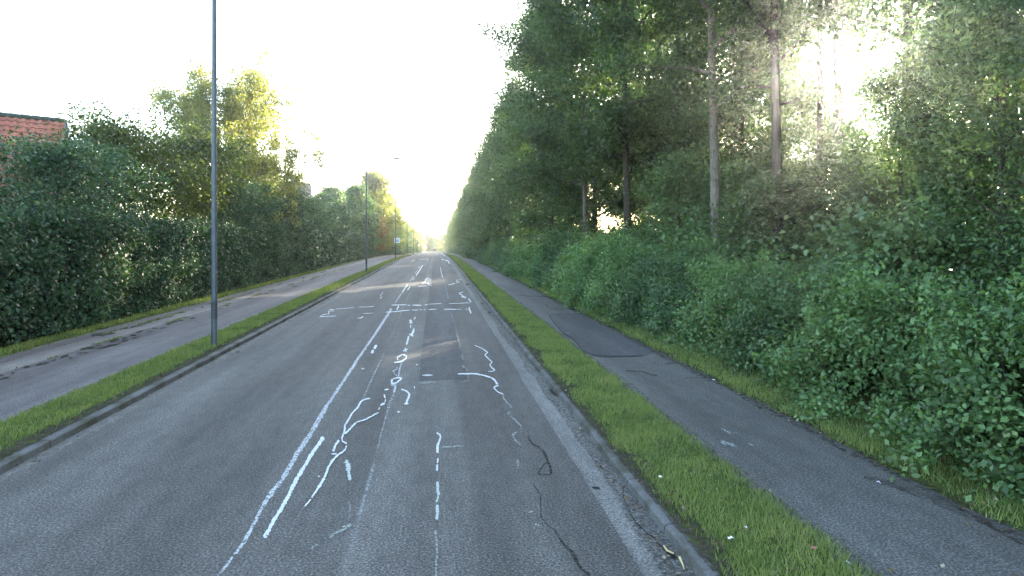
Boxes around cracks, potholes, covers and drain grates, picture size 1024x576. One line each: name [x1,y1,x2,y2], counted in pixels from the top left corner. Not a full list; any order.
crack [527,436,591,576]
